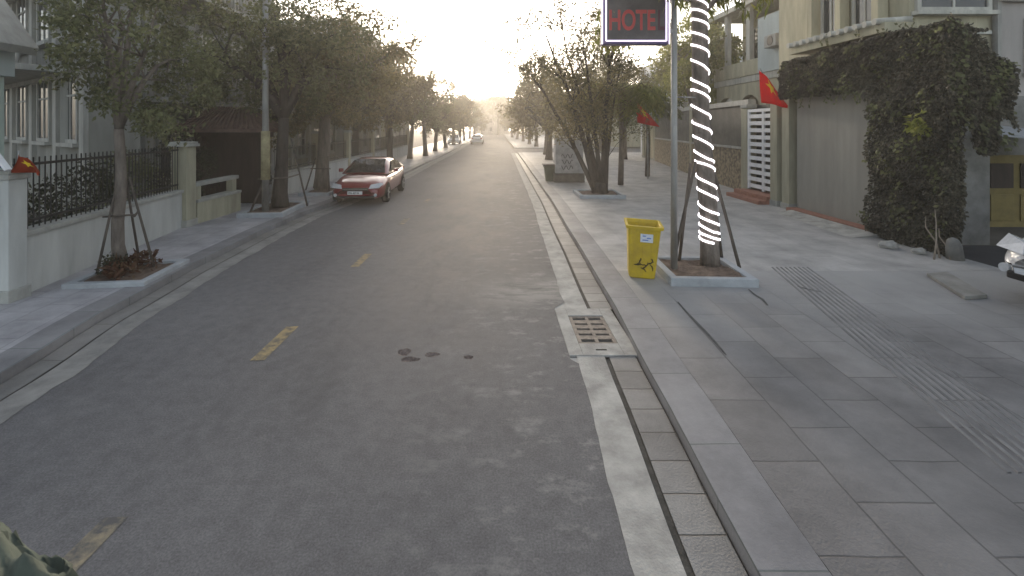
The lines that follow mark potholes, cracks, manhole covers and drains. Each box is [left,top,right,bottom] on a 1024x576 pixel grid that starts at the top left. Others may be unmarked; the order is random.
drain grate [555,308,638,367]
crack [678,302,727,355]
